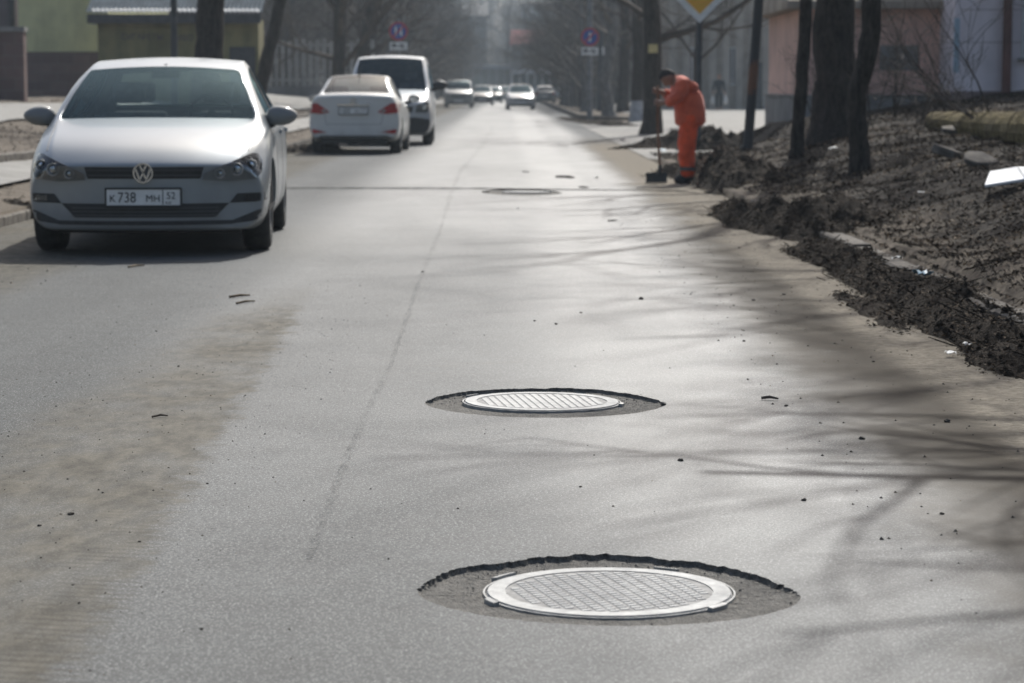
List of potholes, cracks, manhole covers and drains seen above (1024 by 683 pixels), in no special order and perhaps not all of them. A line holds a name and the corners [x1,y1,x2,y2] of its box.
manhole cover [462,392,625,414]
manhole cover [483,567,736,620]
